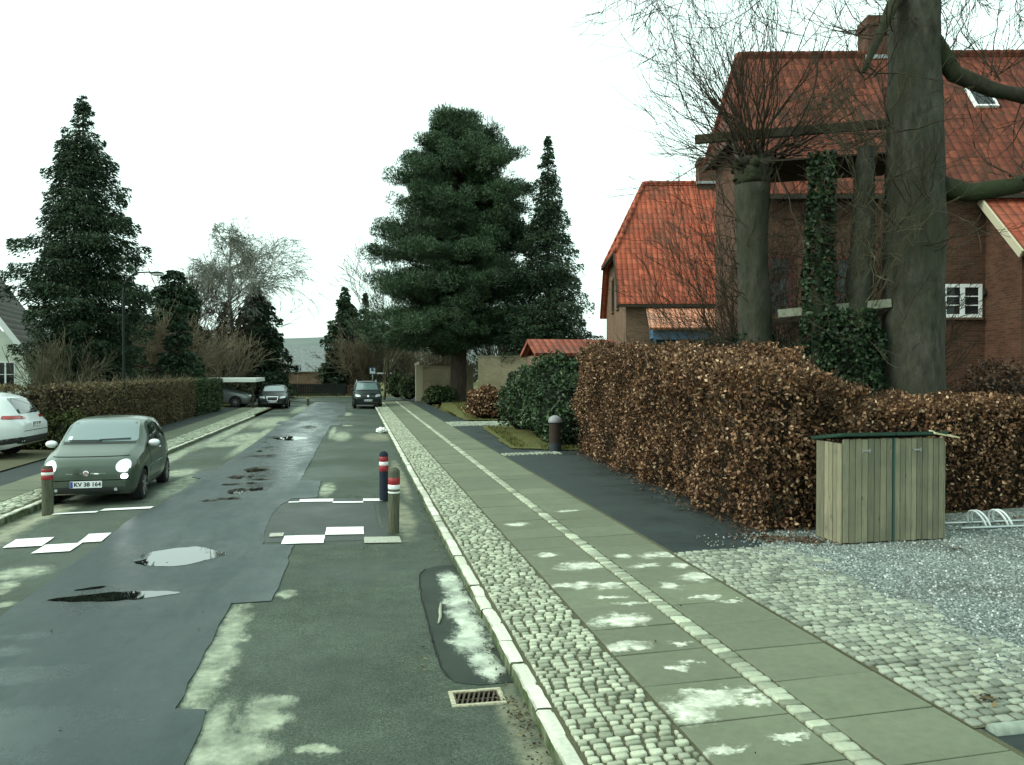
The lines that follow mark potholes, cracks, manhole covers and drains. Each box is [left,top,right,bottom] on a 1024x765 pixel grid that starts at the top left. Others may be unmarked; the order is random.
drain grate [448,687,507,708]
